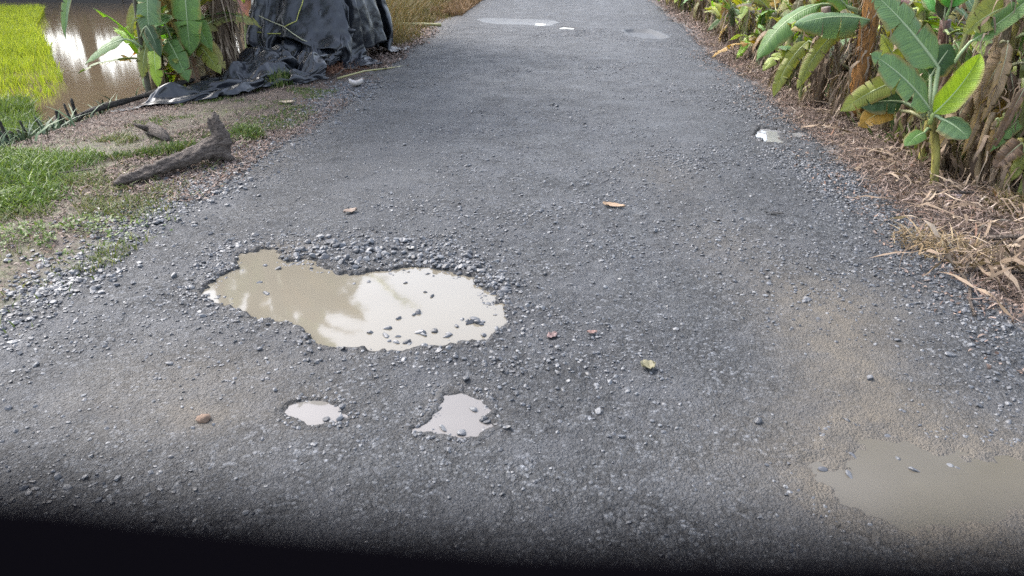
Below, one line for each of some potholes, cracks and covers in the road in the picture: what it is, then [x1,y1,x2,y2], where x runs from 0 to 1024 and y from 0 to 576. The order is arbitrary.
pothole [621,28,670,39]
pothole [779,417,1024,532]
pothole [404,385,504,442]
pothole [269,394,357,430]
pothole [197,245,515,353]
pothole [476,18,559,26]
pothole [750,125,791,144]
